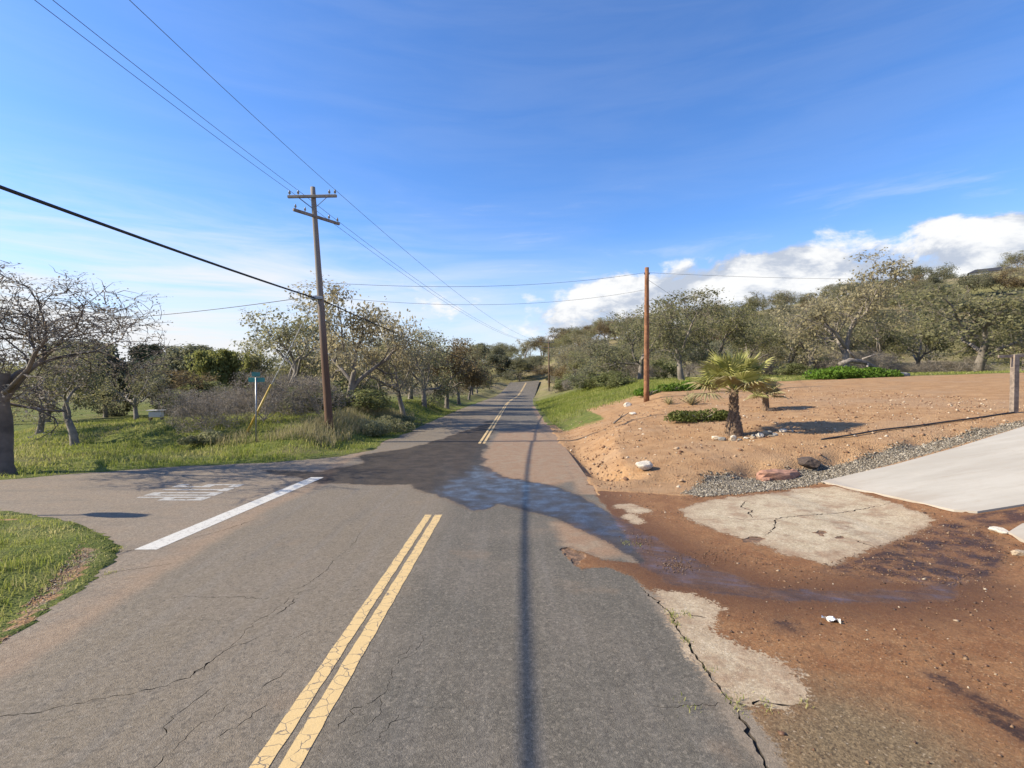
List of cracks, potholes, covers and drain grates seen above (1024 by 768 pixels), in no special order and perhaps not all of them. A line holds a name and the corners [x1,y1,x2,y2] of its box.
crack [166,536,358,599]
crack [319,632,442,755]
crack [640,587,790,768]
crack [728,501,885,535]
pothole [560,547,586,565]
crack [0,591,302,768]
